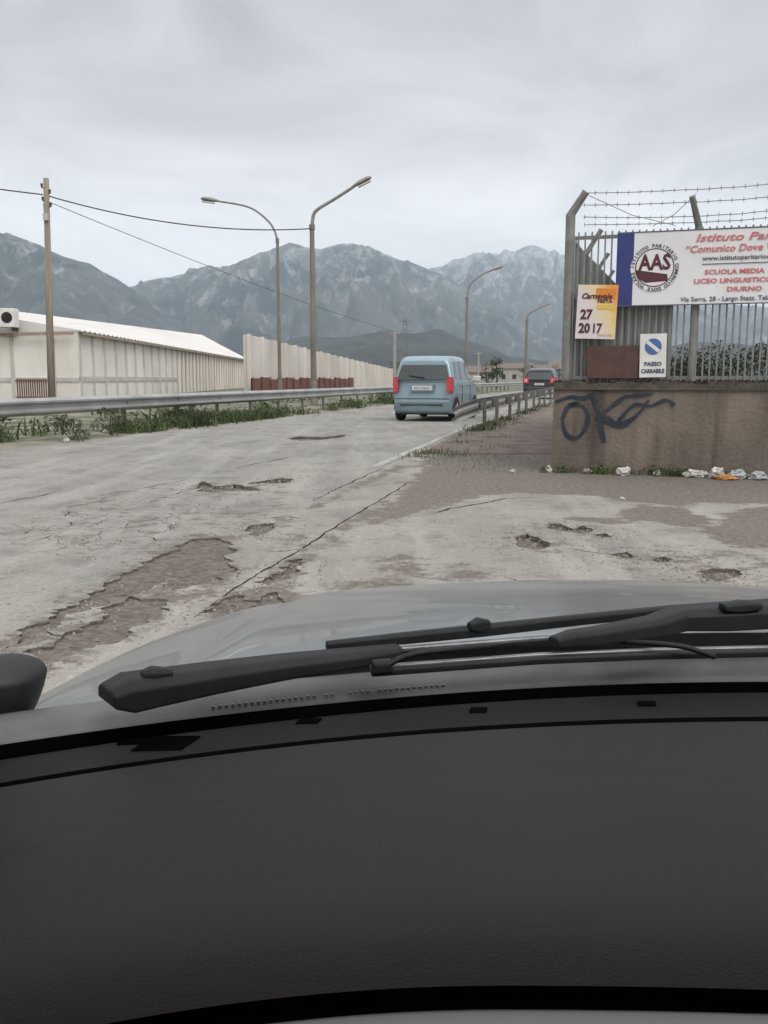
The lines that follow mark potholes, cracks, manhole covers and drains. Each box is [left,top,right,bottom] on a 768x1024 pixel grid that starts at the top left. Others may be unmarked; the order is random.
pothole [515,534,551,549]
pothole [200,592,285,615]
pothole [196,481,261,493]
pothole [546,524,593,533]
crack [432,497,534,514]
pothole [5,538,238,649]
pothole [23,596,170,661]
pothole [699,568,742,582]
pothole [245,523,276,537]
crack [4,479,236,556]
